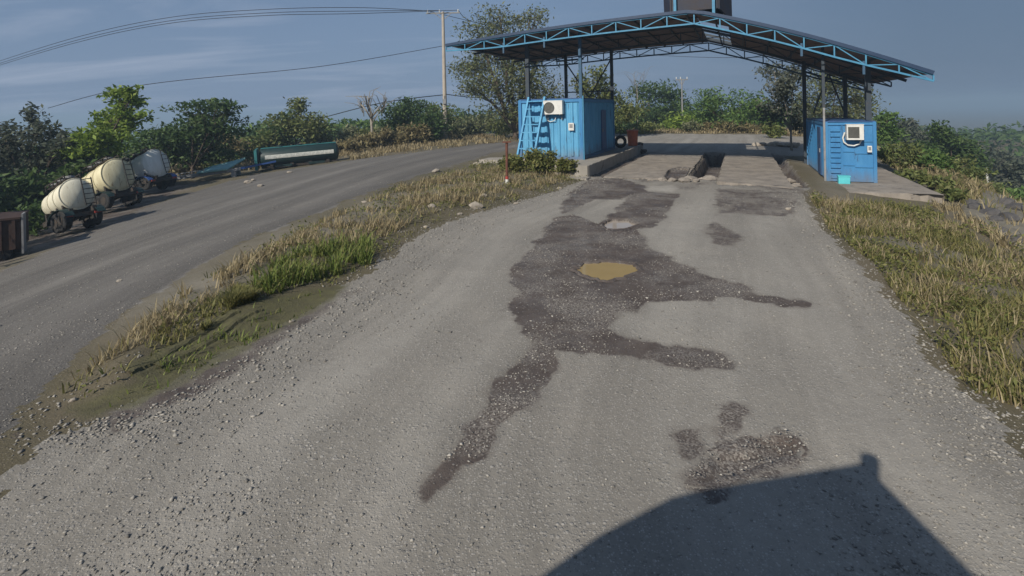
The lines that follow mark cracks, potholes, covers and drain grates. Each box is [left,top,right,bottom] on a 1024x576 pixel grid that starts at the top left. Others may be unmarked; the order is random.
pothole [570,260,645,283]
pothole [599,218,641,230]
